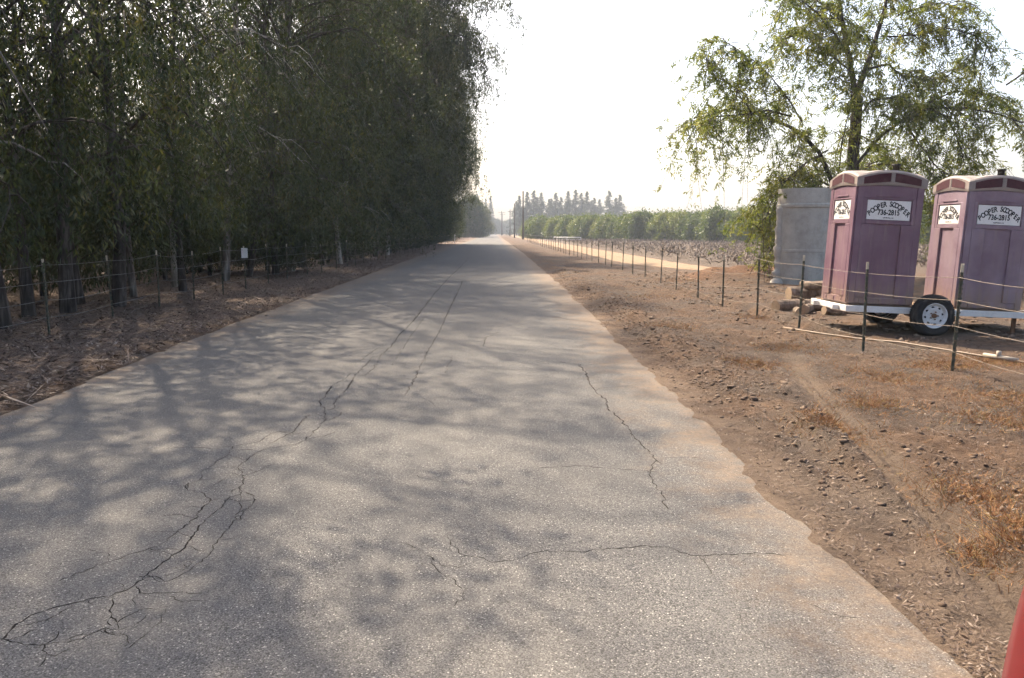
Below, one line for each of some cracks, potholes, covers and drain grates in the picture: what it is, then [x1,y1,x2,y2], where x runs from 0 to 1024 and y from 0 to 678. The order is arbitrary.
crack [0,259,468,667]
crack [401,535,780,608]
crack [541,362,696,509]
